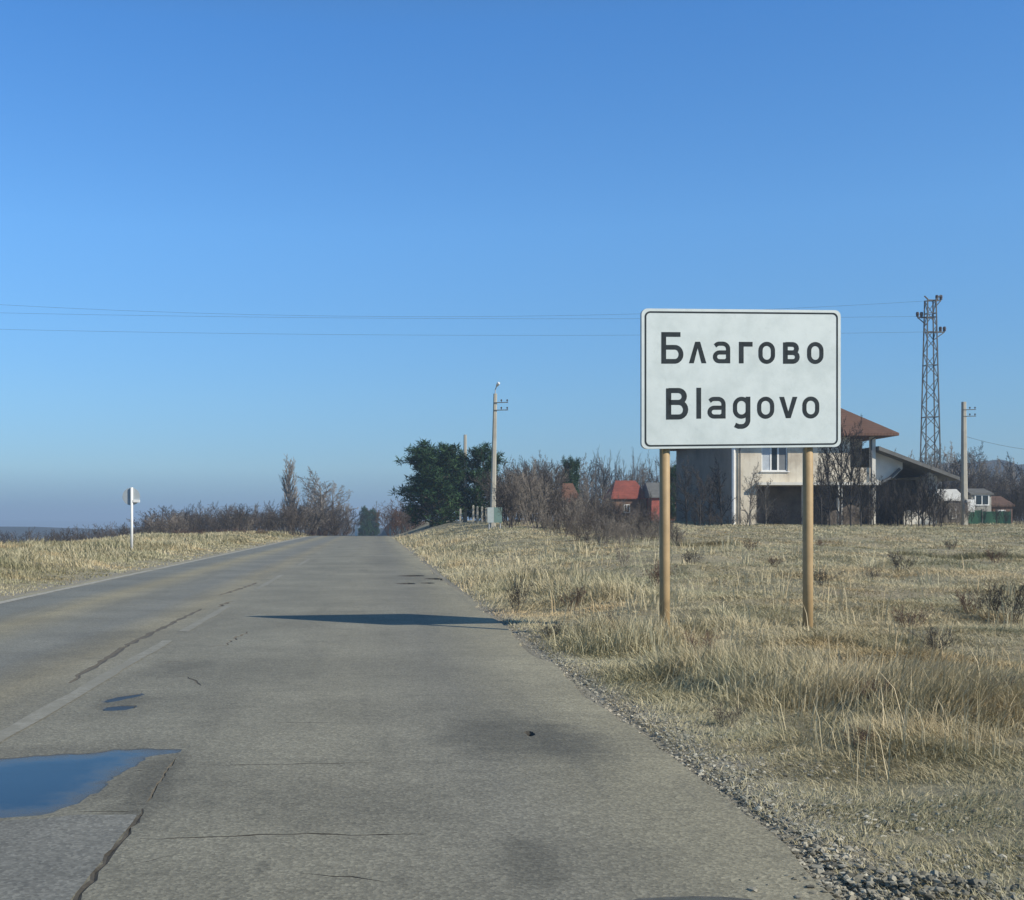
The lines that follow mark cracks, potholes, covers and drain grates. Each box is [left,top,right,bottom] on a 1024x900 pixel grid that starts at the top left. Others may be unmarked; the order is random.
crack [303,873,384,882]
pothole [0,748,182,818]
crack [138,833,397,864]
crack [218,582,257,607]
